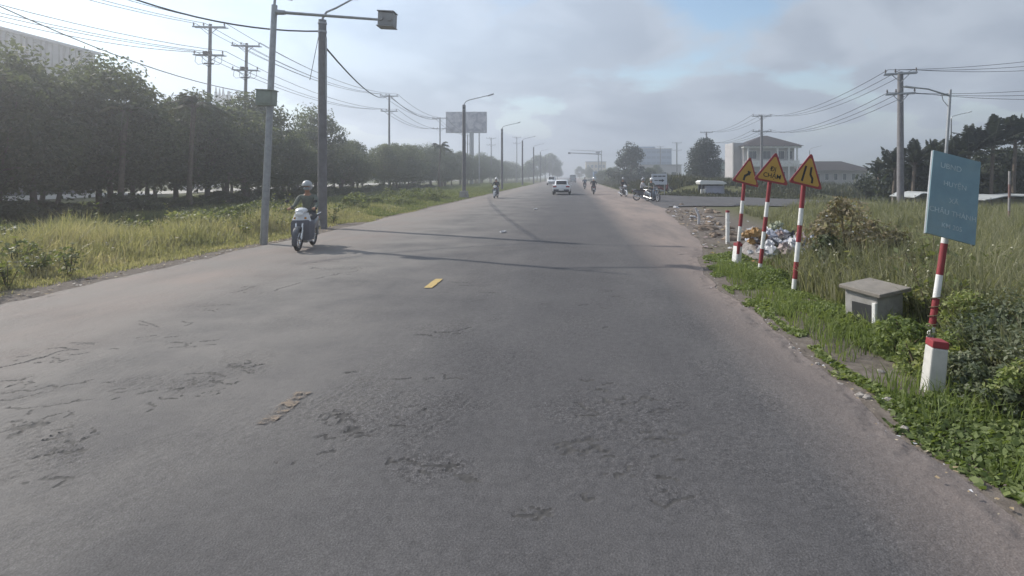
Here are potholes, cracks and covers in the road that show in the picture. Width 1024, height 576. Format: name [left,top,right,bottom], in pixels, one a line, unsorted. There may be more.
crack [385,457,481,483]
crack [113,261,363,349]
crack [0,342,264,488]
crack [511,506,554,521]
crack [555,378,694,509]
